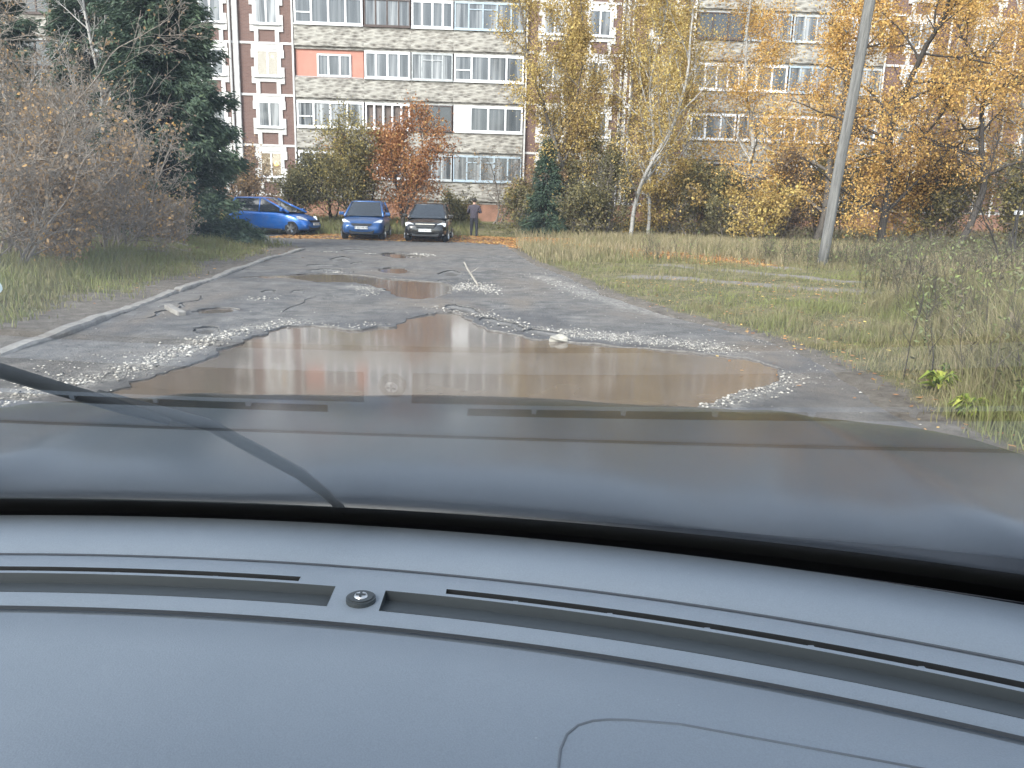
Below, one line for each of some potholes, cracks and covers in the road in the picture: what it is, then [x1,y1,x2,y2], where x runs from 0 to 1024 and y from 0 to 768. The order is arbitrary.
crack [129,295,203,321]
pothole [108,311,784,407]
pothole [241,273,454,299]
